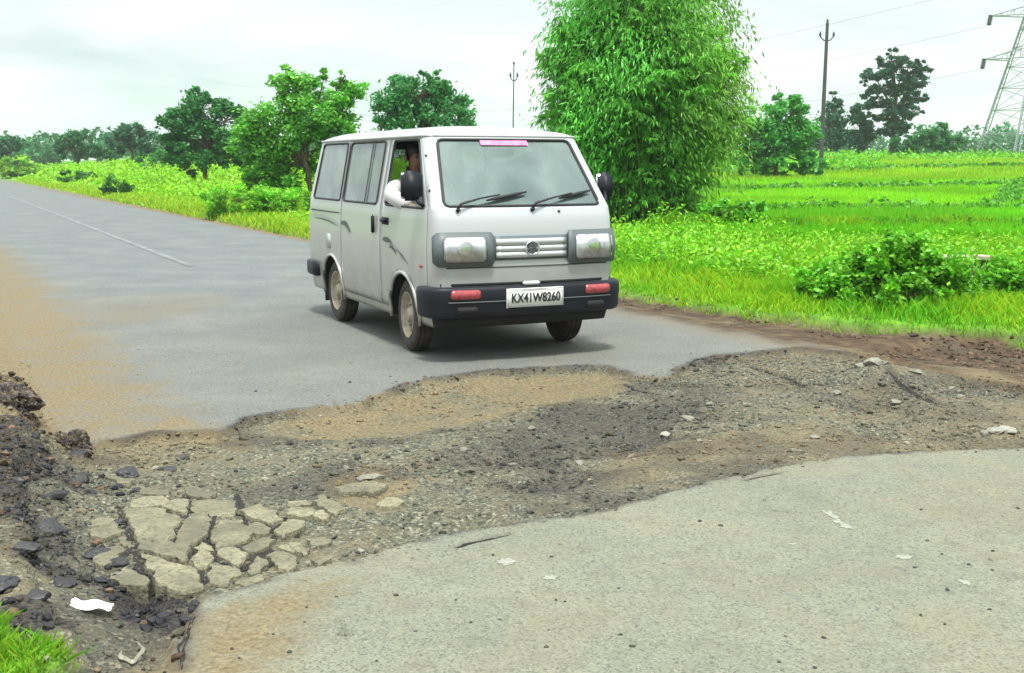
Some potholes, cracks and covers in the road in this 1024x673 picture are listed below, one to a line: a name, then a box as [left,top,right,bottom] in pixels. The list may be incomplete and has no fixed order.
pothole [348,508,514,558]
crack [457,535,508,548]
pothole [110,575,183,630]
pothole [251,370,634,441]
pothole [813,370,977,444]
crack [89,494,300,591]
pothole [479,394,718,499]
